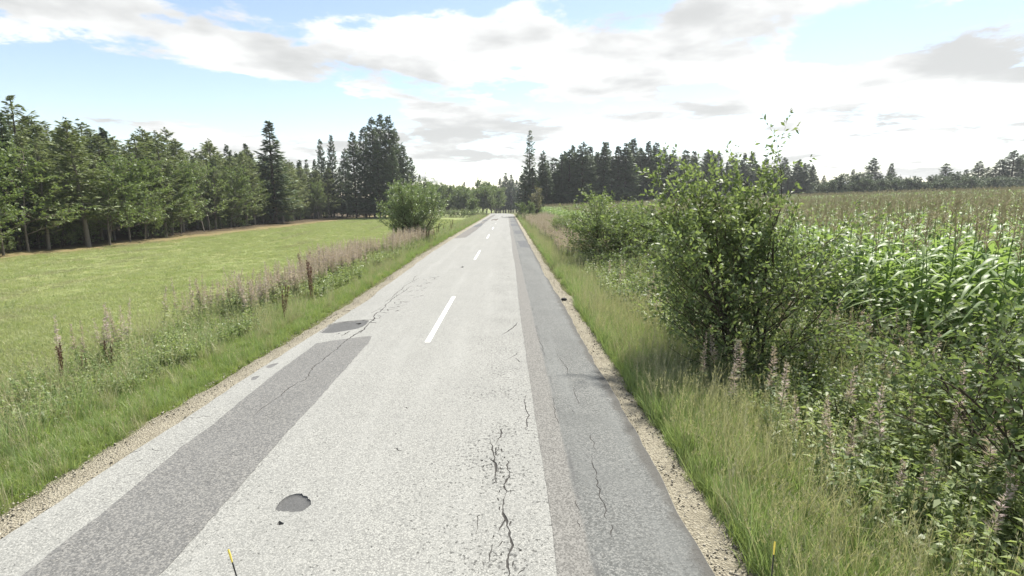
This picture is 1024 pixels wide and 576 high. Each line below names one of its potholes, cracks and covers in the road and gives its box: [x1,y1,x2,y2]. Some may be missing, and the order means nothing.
crack [575,437,613,535]
crack [476,430,524,576]
crack [256,276,439,414]
pothole [275,494,311,512]
